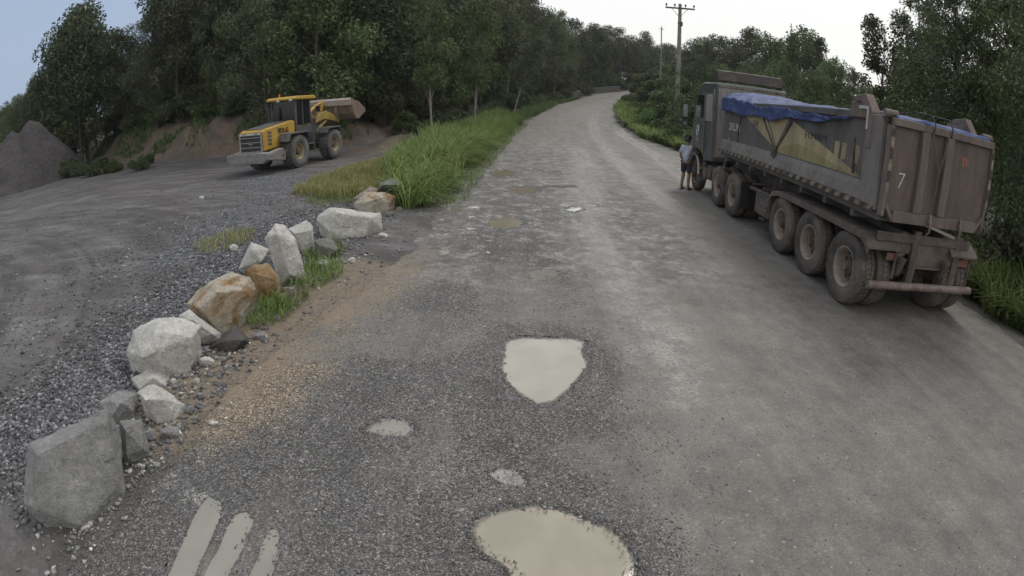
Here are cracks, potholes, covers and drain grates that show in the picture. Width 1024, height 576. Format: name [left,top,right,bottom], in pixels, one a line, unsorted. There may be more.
pothole [478,214,534,231]
pothole [483,328,605,416]
pothole [484,169,522,178]
pothole [504,184,546,195]
pothole [444,484,668,576]
